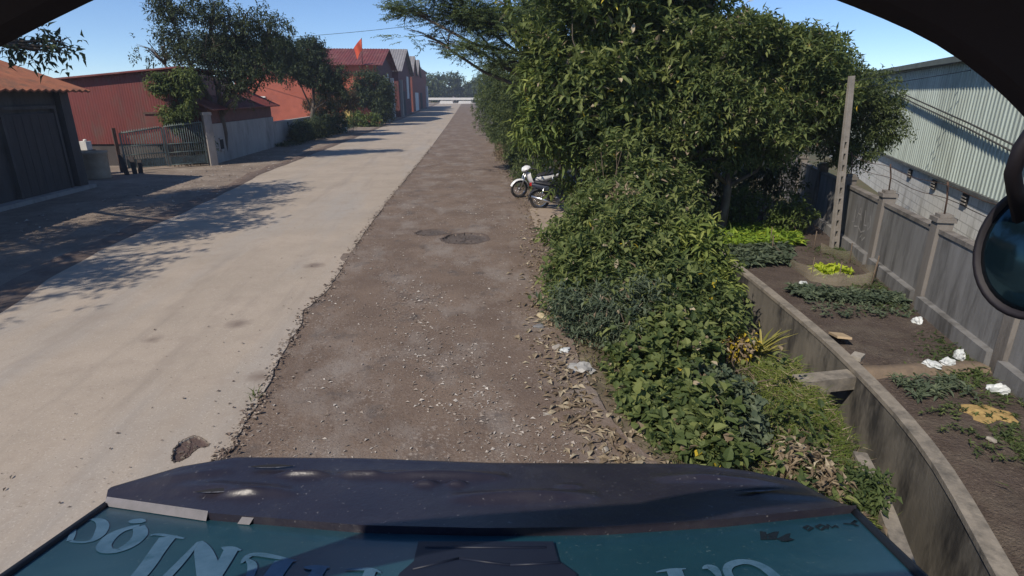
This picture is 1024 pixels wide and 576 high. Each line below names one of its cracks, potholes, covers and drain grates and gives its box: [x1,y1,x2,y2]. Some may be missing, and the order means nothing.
pothole [172,435,211,463]
